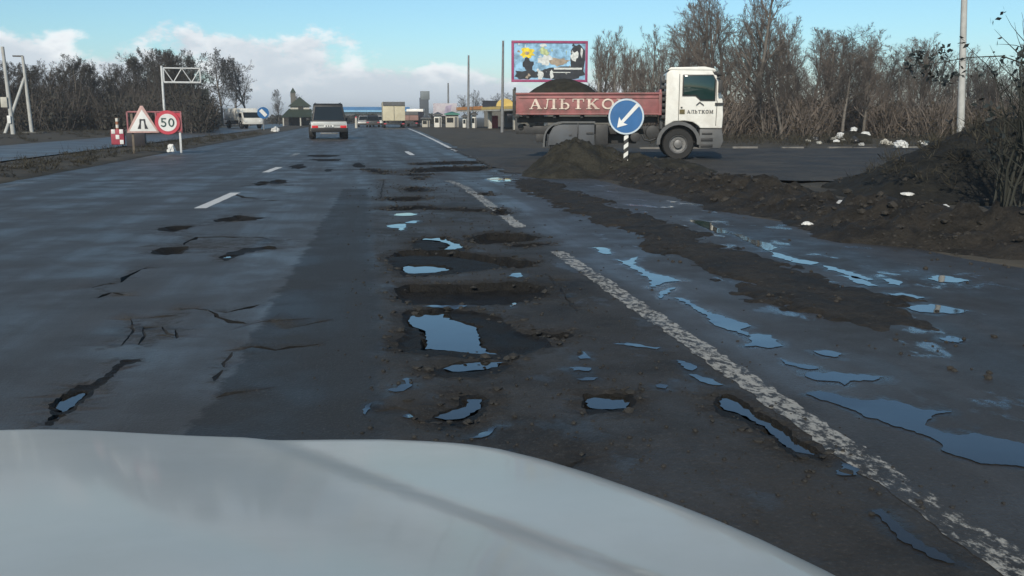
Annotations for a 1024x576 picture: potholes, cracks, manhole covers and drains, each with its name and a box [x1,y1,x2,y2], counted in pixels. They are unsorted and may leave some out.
pothole [151,246,189,255]
crack [122,305,322,345]
pothole [466,232,541,244]
pothole [420,394,490,429]
pothole [394,281,551,306]
crack [92,268,147,298]
pothole [219,246,277,261]
pothole [530,332,574,341]
pothole [42,359,142,426]
pothole [713,394,825,461]
pothole [395,308,554,360]
crack [212,344,318,398]
